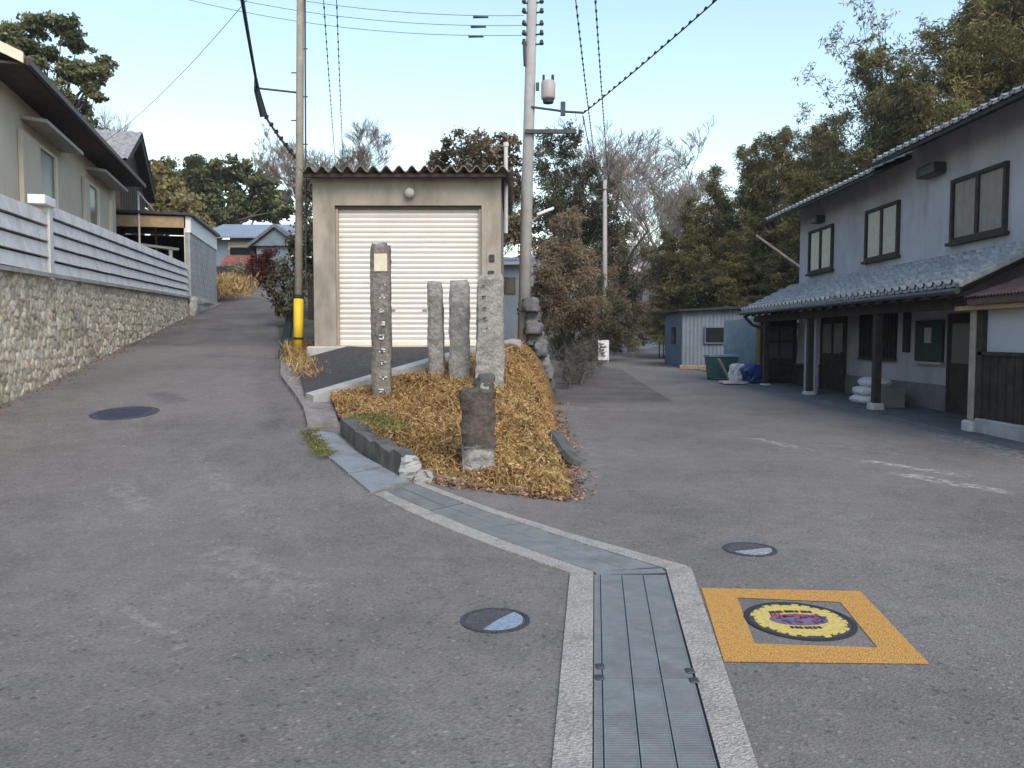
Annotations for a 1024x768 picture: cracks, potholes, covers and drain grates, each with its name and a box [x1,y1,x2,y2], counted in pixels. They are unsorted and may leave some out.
manhole cover [460,608,530,634]
manhole cover [89,406,160,420]
manhole cover [744,602,858,641]
manhole cover [722,542,778,557]
